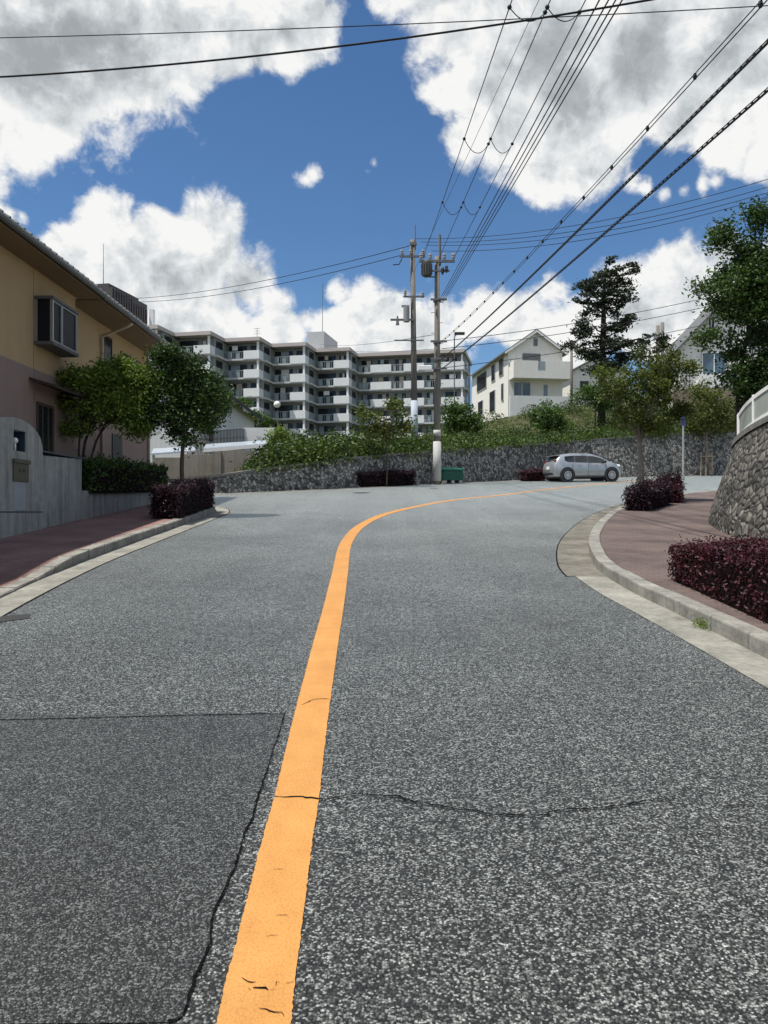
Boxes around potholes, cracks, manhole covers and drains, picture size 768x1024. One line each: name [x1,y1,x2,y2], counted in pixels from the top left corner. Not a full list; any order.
crack [0,698,752,1021]
